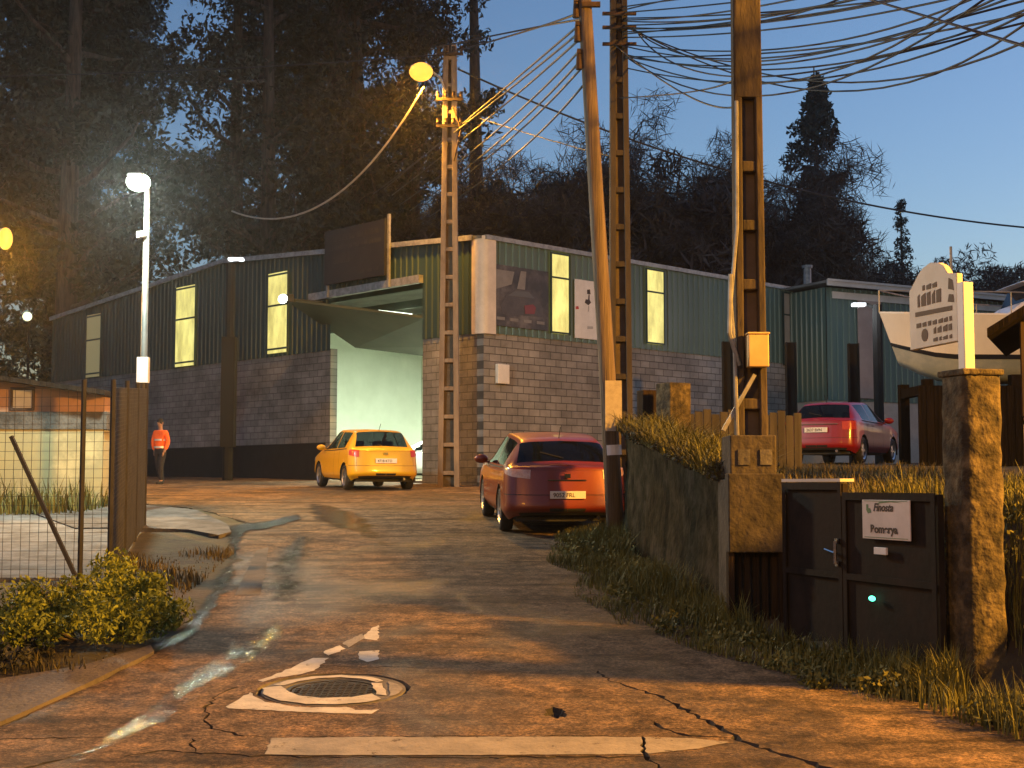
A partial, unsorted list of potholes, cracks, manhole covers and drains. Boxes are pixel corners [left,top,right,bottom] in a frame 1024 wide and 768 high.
crack [0,671,832,768]
manhole cover [256,673,411,707]
pothole [544,707,567,719]
